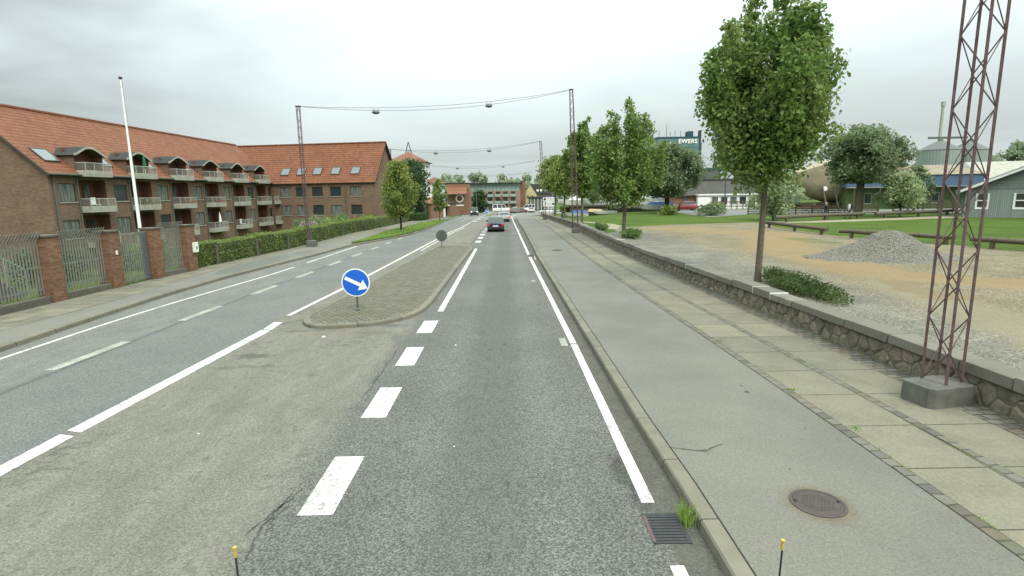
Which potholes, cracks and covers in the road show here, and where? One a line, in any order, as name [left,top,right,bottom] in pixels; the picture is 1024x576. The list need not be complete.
manhole cover [789,489,848,518]
drain grate [641,513,693,544]
